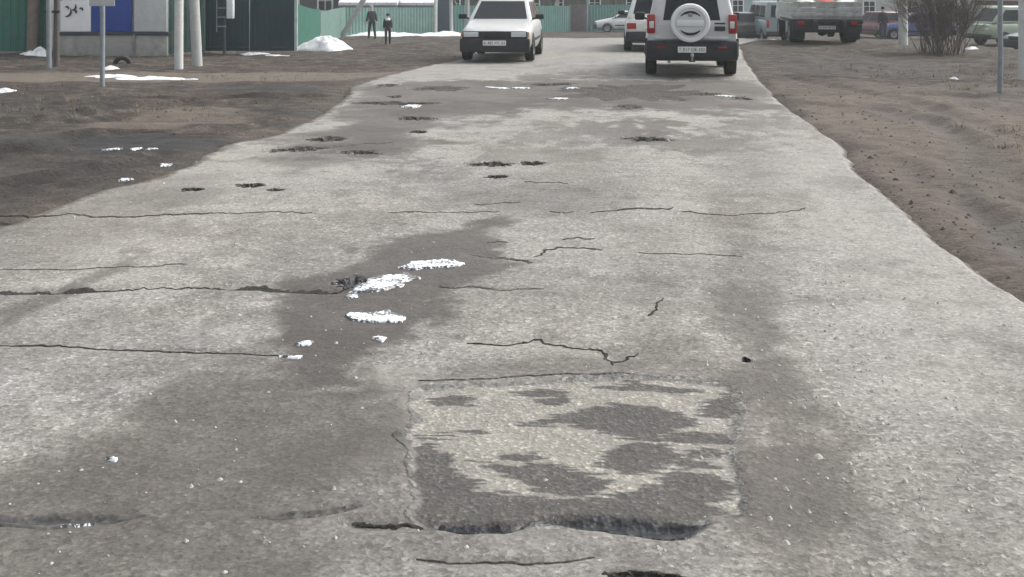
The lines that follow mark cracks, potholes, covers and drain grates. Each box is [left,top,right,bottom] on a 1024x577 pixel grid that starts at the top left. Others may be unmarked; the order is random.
crack [471,237,601,264]
pothole [331,275,368,289]
crack [648,298,664,316]
crack [591,207,806,216]
crack [0,344,279,356]
crack [0,285,347,296]
crack [416,557,595,566]
crack [418,339,639,381]
